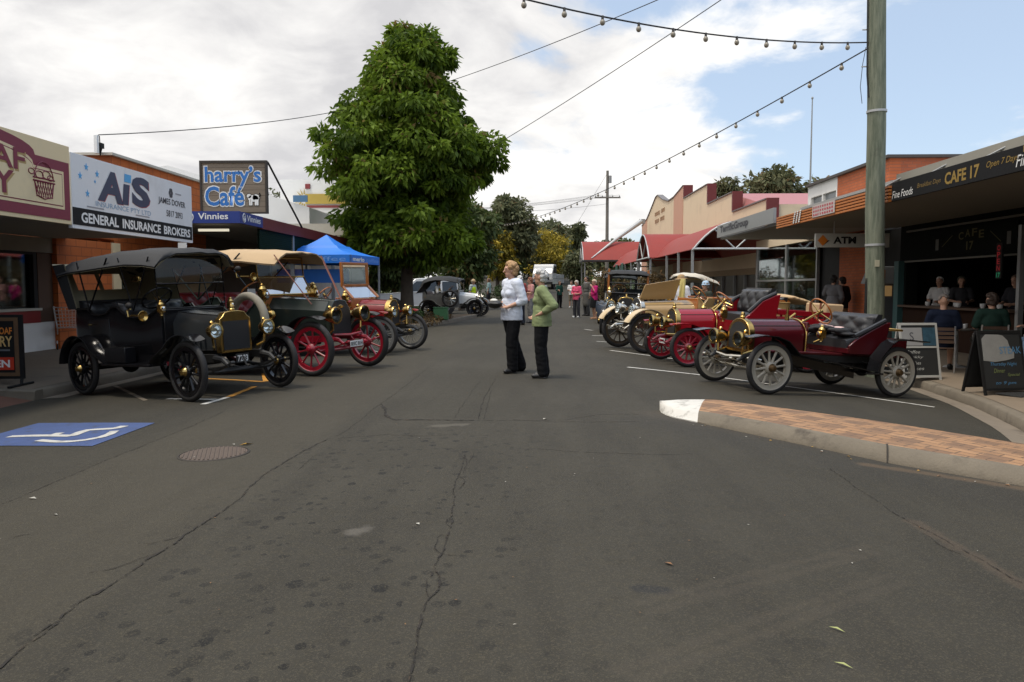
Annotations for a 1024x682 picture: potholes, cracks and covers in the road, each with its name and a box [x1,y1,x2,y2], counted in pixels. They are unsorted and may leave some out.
manhole cover [177,446,250,462]
crack [830,468,1023,583]
crack [0,440,325,668]
crack [407,454,473,682]
